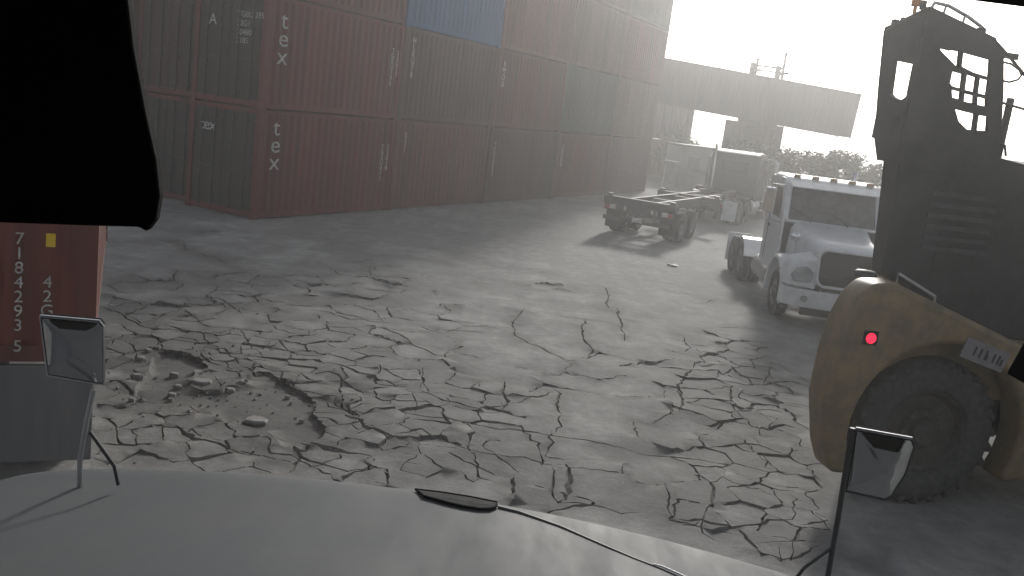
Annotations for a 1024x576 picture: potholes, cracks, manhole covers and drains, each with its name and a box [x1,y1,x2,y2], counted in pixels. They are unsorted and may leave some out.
crack [92,260,531,486]
crack [511,287,625,361]
crack [621,327,830,562]
pothole [135,350,327,449]
